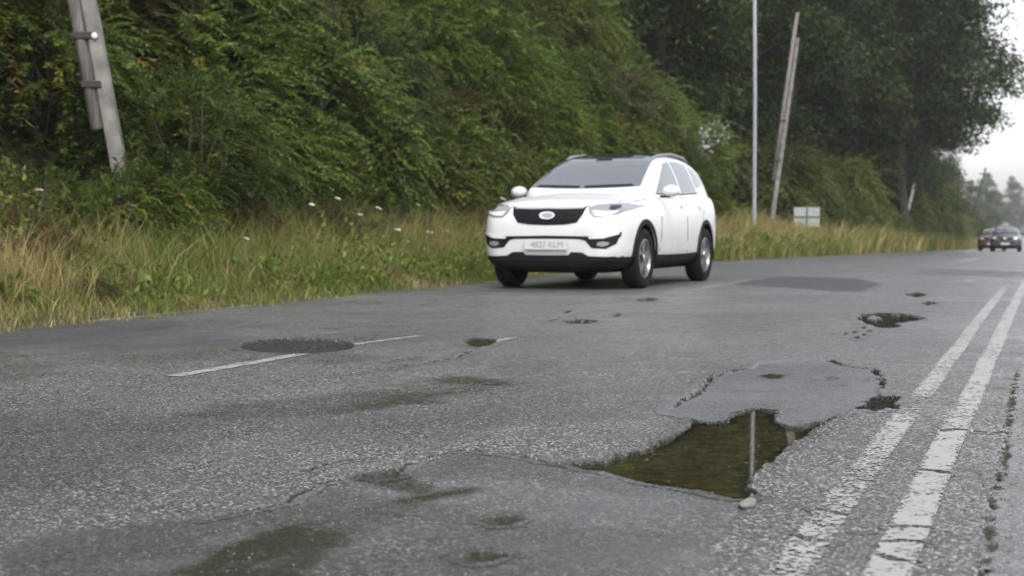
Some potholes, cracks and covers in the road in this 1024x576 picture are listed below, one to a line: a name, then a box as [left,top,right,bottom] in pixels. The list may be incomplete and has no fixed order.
pothole [439,547,528,568]
pothole [551,408,852,501]
pothole [653,358,896,427]
crack [184,447,571,524]
pothole [454,337,505,348]
pothole [847,312,936,329]
pothole [850,392,911,413]
crack [658,367,755,410]
pothole [466,512,536,529]
